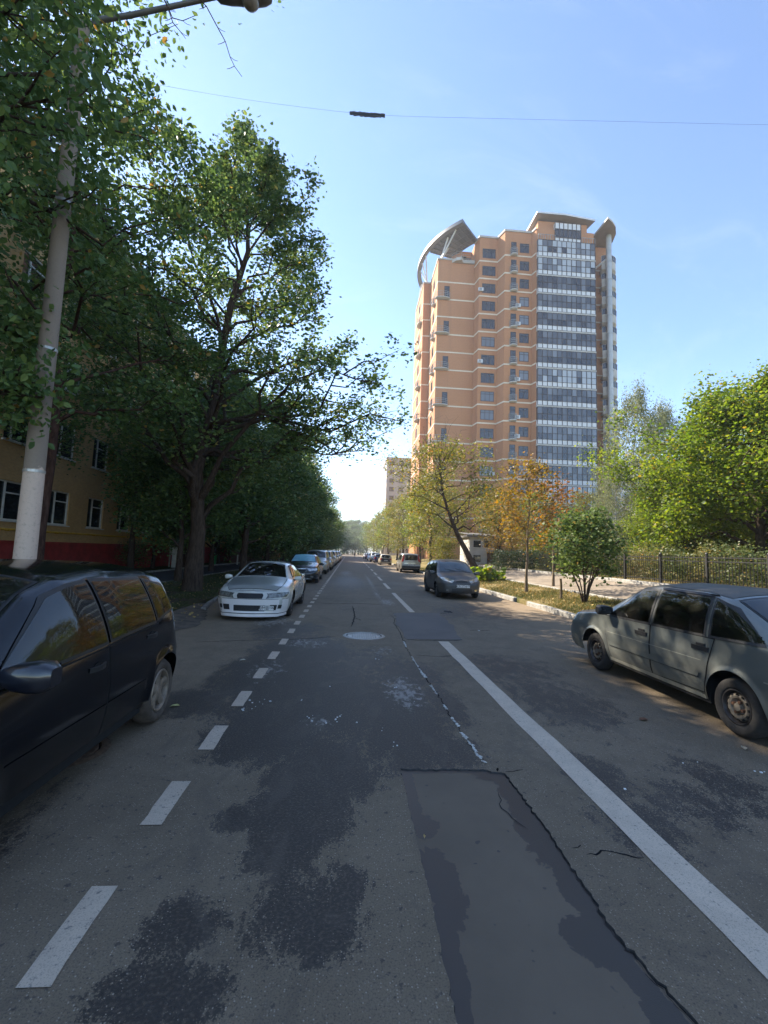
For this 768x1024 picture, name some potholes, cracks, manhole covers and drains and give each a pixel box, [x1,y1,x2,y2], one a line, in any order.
manhole cover [343,632,385,640]
crack [496,768,692,1022]
